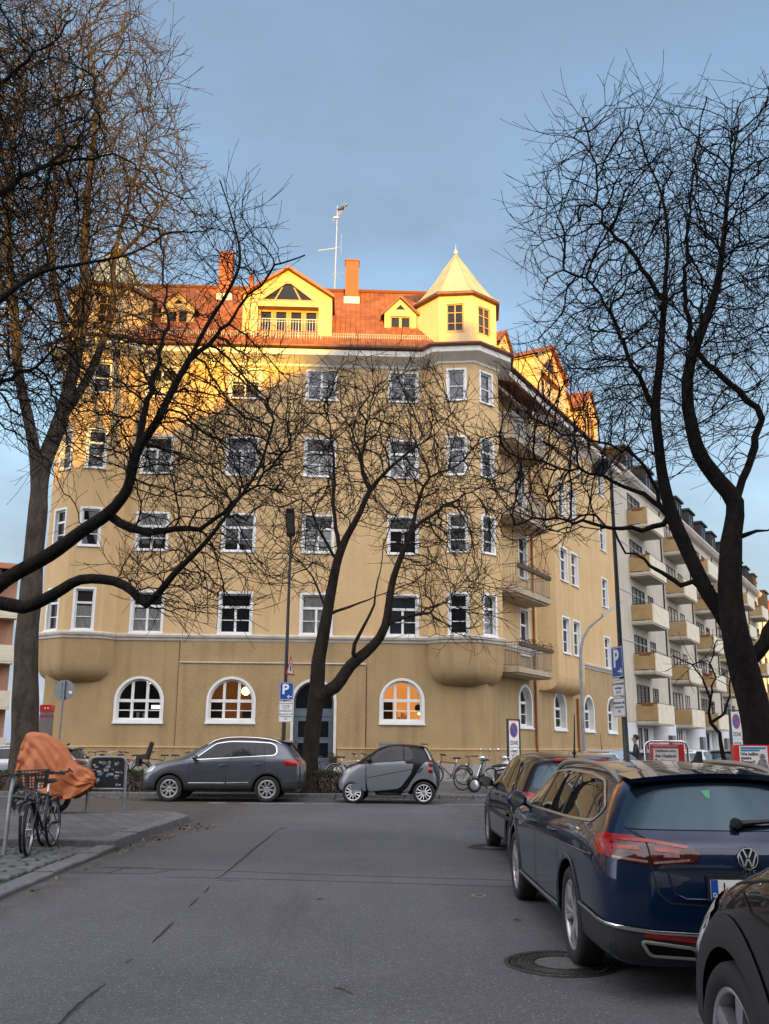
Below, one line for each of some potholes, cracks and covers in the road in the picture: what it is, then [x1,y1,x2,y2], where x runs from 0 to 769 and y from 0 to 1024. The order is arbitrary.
manhole cover [503,950,620,978]
crack [57,984,105,1024]
crack [152,827,286,943]
